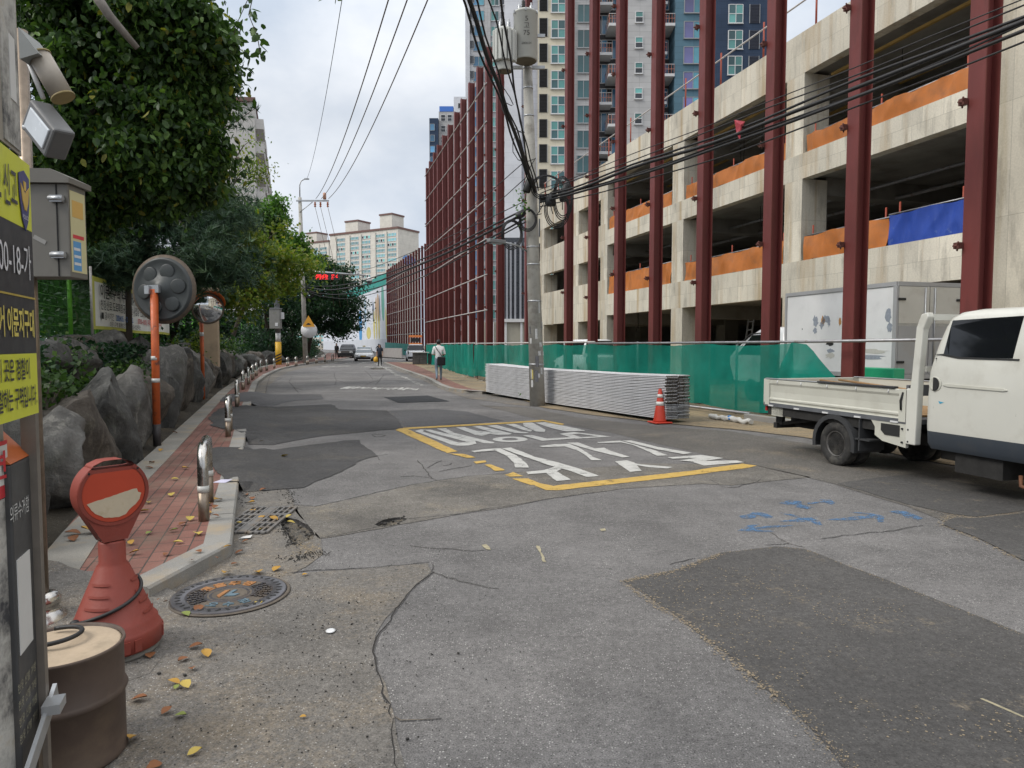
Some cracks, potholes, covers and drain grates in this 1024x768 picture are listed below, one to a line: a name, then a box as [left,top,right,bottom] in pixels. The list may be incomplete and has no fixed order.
manhole cover [168,575,291,617]
pothole [281,517,315,545]
pothole [375,515,406,527]
drain grate [234,506,298,534]
crack [401,460,472,482]
crack [286,546,499,768]
